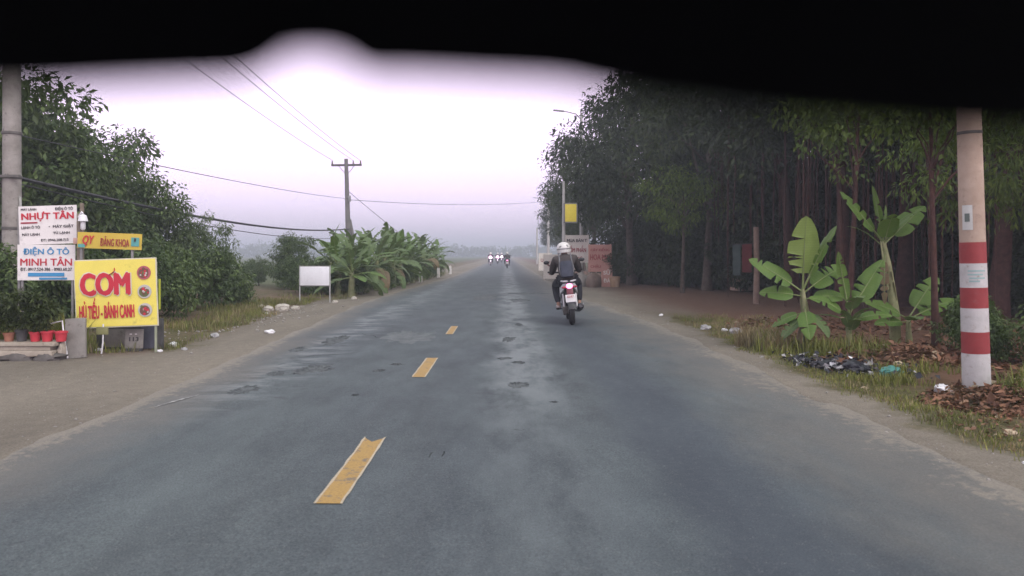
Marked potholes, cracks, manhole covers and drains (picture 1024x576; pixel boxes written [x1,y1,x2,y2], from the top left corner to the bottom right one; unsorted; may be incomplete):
pothole [322,335,350,346]
pothole [228,385,260,395]
pothole [288,364,335,375]
